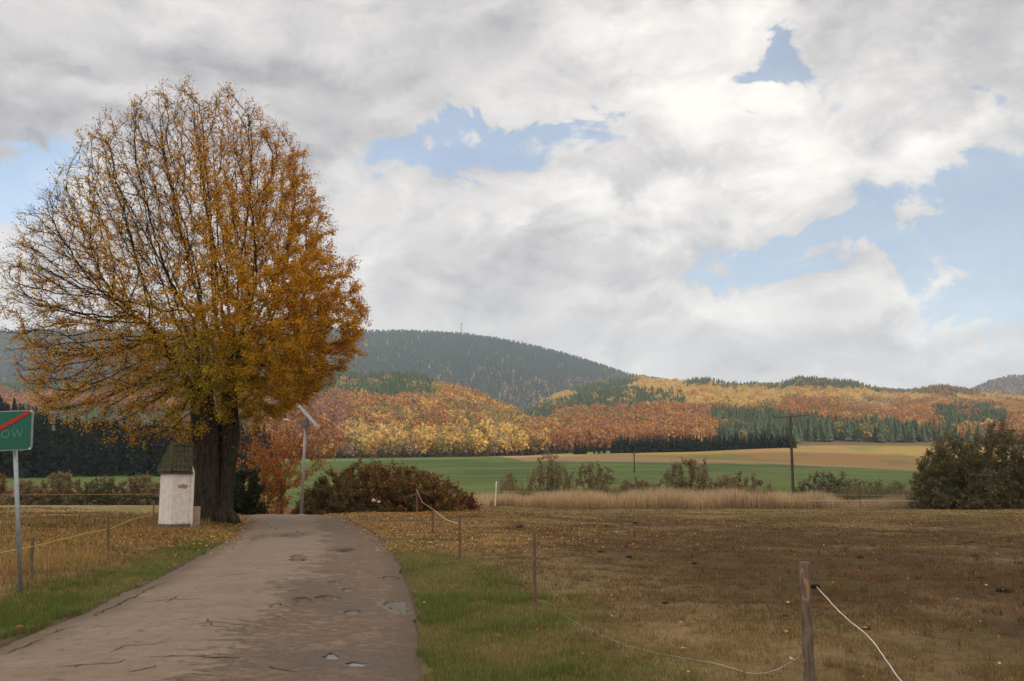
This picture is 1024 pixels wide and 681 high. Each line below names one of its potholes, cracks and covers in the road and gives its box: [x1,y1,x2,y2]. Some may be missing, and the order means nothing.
pothole [337,609,369,617]
crack [58,642,236,672]
pothole [285,554,311,562]
pothole [376,599,414,615]
pothole [312,651,348,661]
crack [96,581,175,616]
